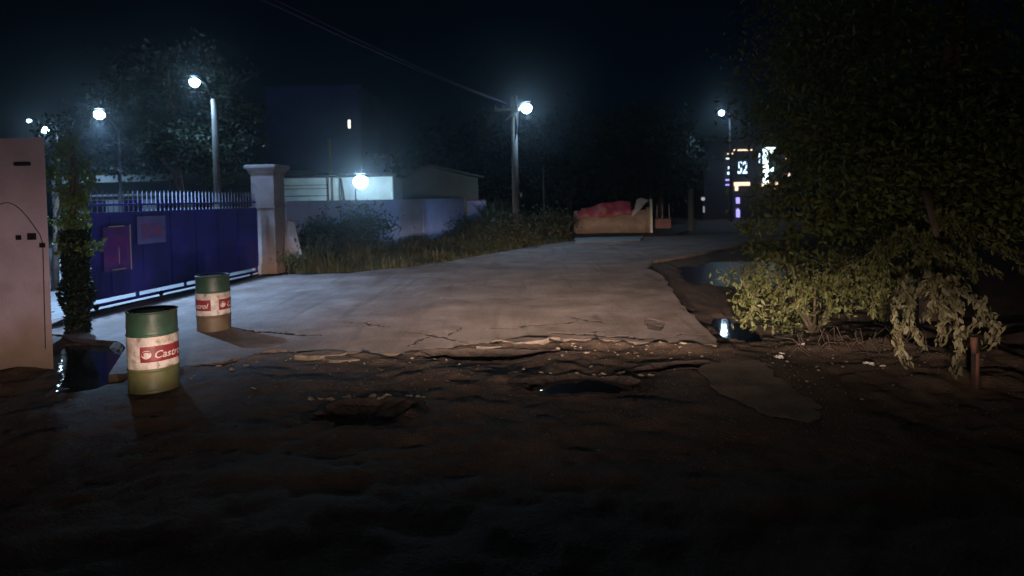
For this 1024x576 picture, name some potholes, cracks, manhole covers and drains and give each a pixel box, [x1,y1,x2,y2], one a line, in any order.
crack [491,316,659,340]
pothole [299,395,429,430]
crack [241,322,390,336]
pothole [507,372,658,399]
crack [408,327,467,347]
